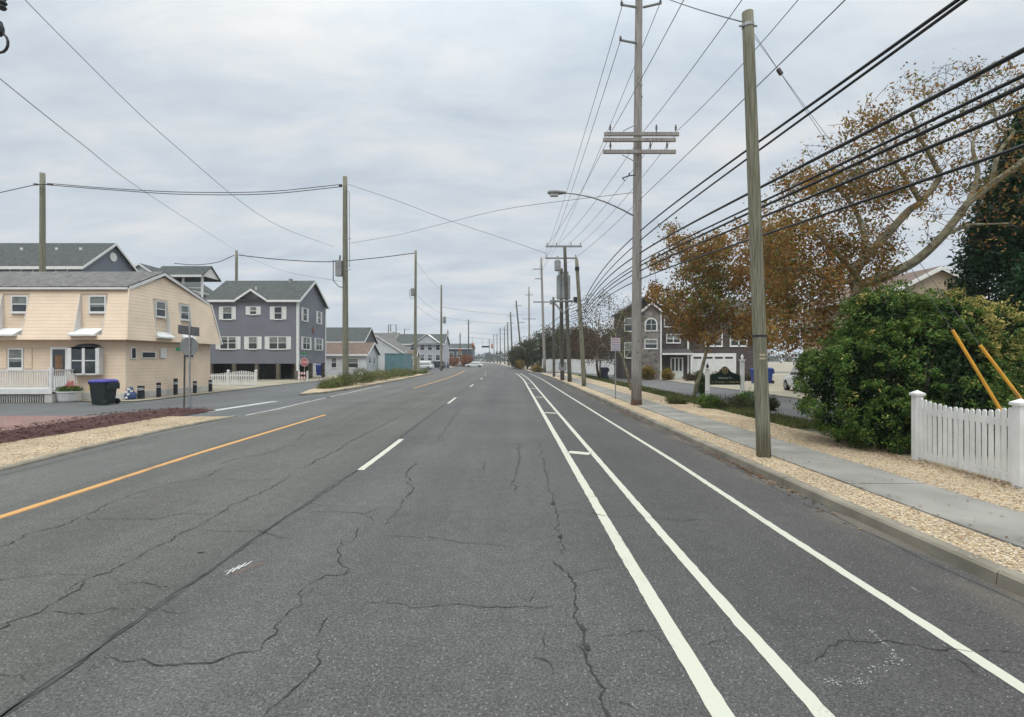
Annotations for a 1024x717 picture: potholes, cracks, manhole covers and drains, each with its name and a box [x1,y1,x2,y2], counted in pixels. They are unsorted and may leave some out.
crack [89,464,519,672]
crack [540,444,663,717]
crack [797,623,1013,672]
crack [0,394,460,629]
crack [263,651,335,716]
crack [383,593,553,612]
